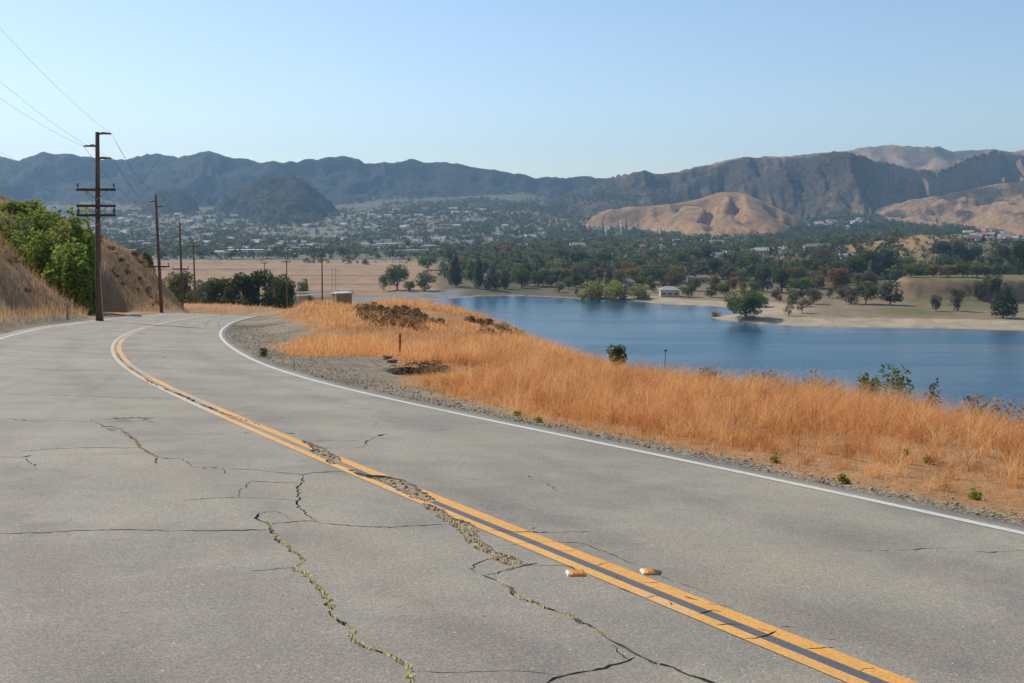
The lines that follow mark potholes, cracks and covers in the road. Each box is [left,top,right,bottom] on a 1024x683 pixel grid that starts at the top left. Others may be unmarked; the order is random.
crack [0,353,835,683]
